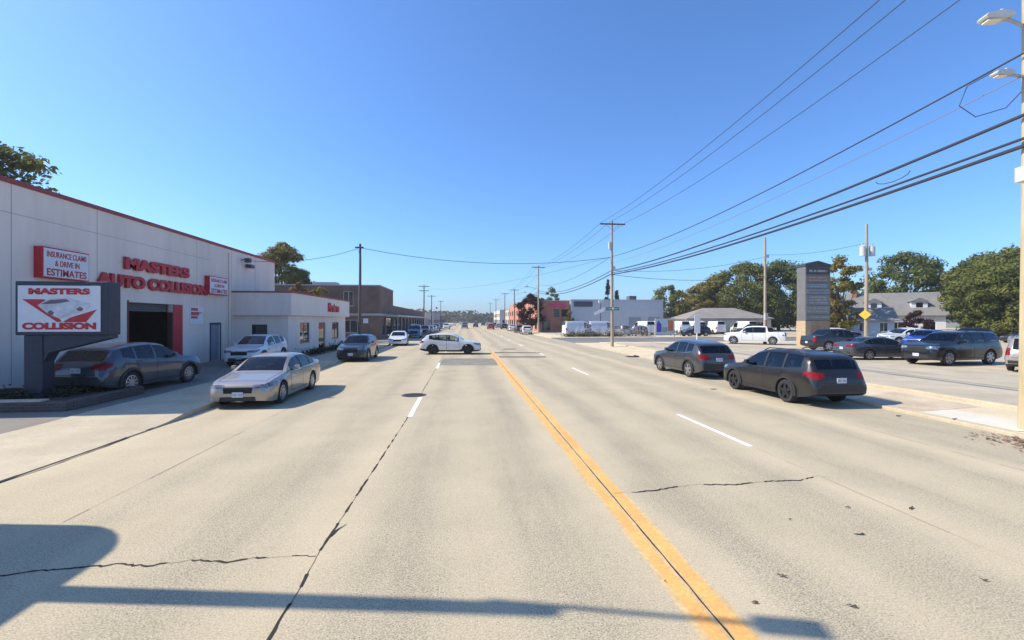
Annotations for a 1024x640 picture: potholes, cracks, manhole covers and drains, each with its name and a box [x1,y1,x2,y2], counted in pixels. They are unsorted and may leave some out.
crack [615,476,826,494]
crack [0,355,444,640]
